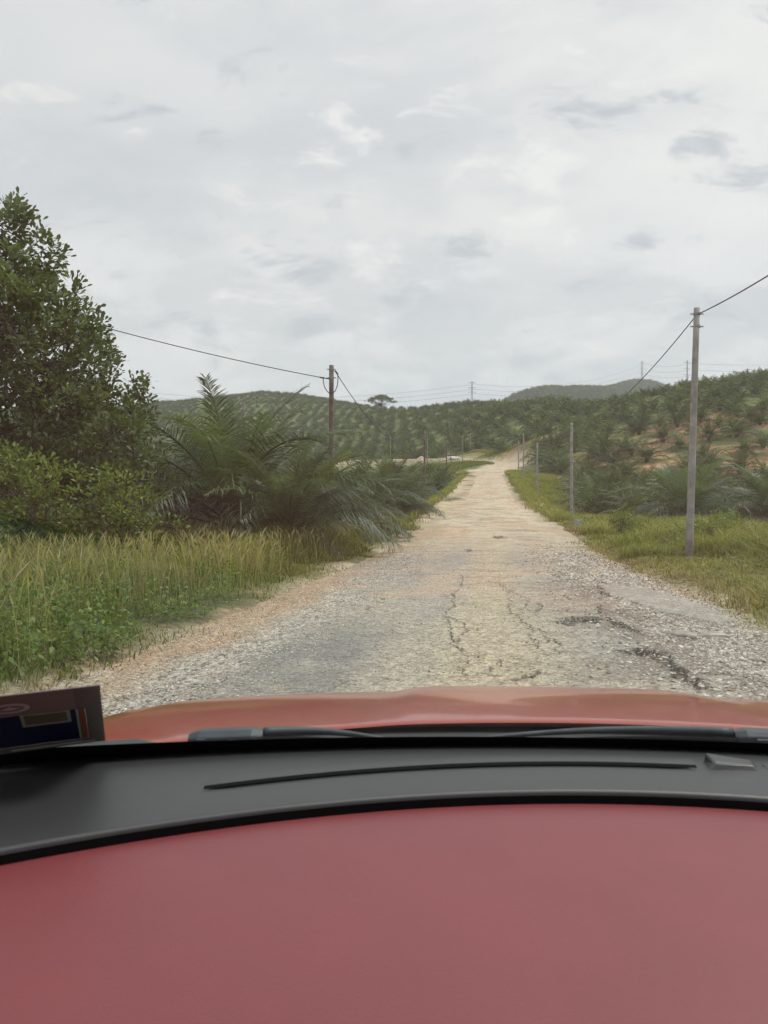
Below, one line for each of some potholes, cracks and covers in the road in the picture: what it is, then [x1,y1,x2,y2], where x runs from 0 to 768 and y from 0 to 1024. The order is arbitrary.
crack [443,575,563,678]
pothole [542,616,603,626]
pothole [615,647,713,691]
